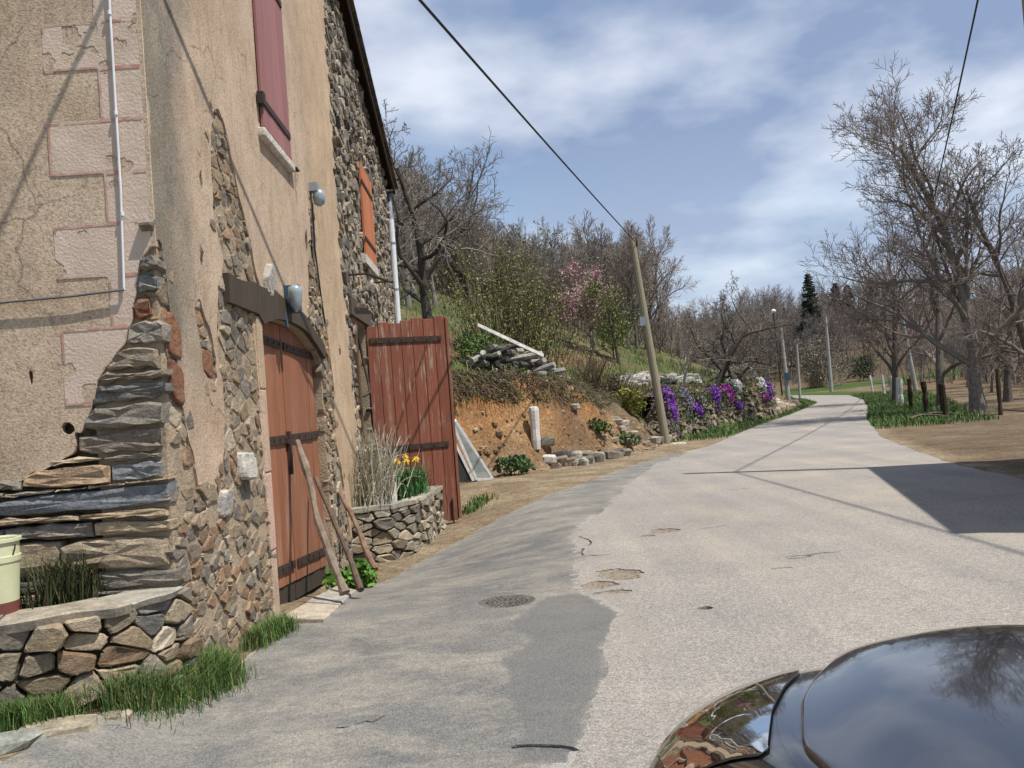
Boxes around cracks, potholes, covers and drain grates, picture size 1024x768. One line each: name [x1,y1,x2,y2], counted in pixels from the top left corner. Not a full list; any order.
pothole [642,529,679,537]
pothole [580,569,642,595]
manhole cover [479,595,535,608]
